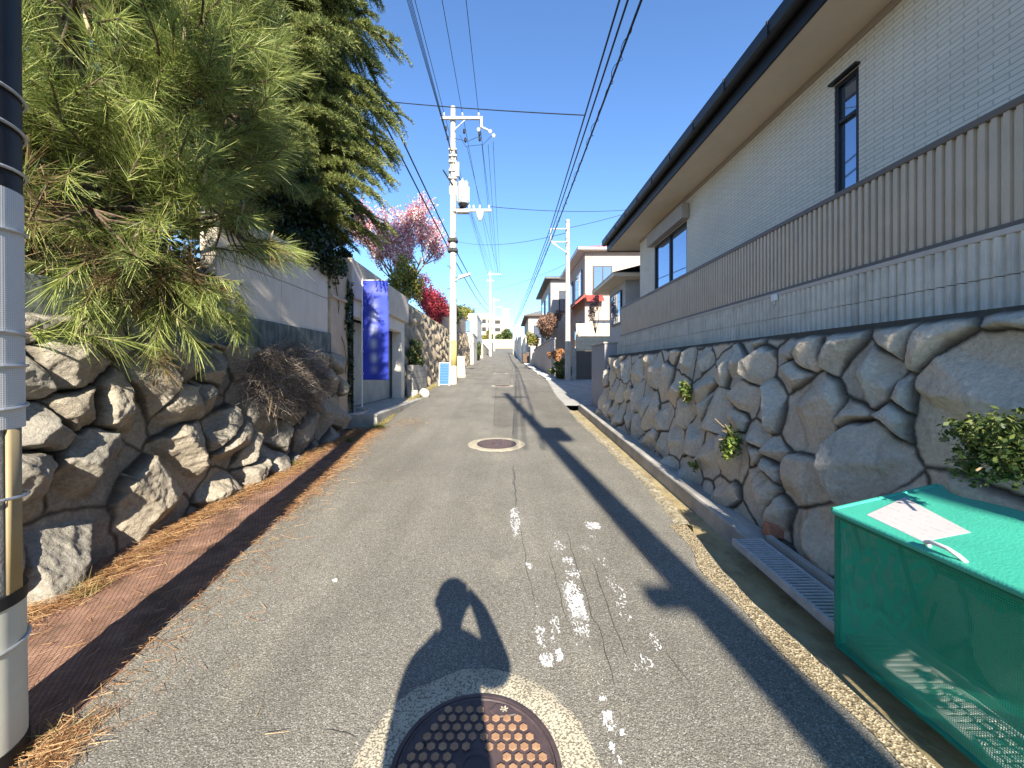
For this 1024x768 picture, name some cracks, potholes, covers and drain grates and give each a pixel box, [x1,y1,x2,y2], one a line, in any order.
crack [505,353,535,600]
manhole cover [352,668,601,768]
manhole cover [468,438,525,452]
